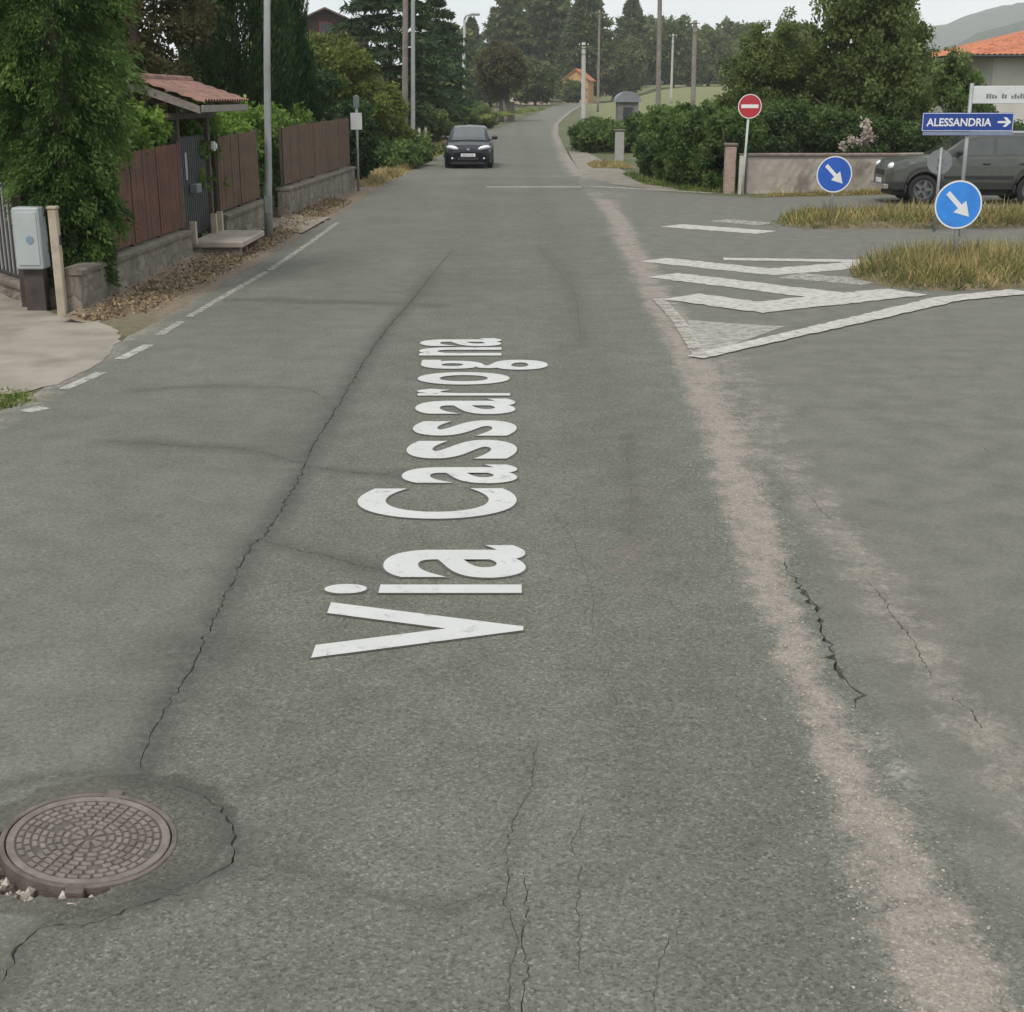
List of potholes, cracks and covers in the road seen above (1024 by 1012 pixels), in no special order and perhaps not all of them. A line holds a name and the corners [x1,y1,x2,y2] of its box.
manhole cover [0,789,178,899]
crack [650,938,670,1012]
crack [784,481,982,728]
crack [2,253,539,1012]
crack [570,813,588,977]
